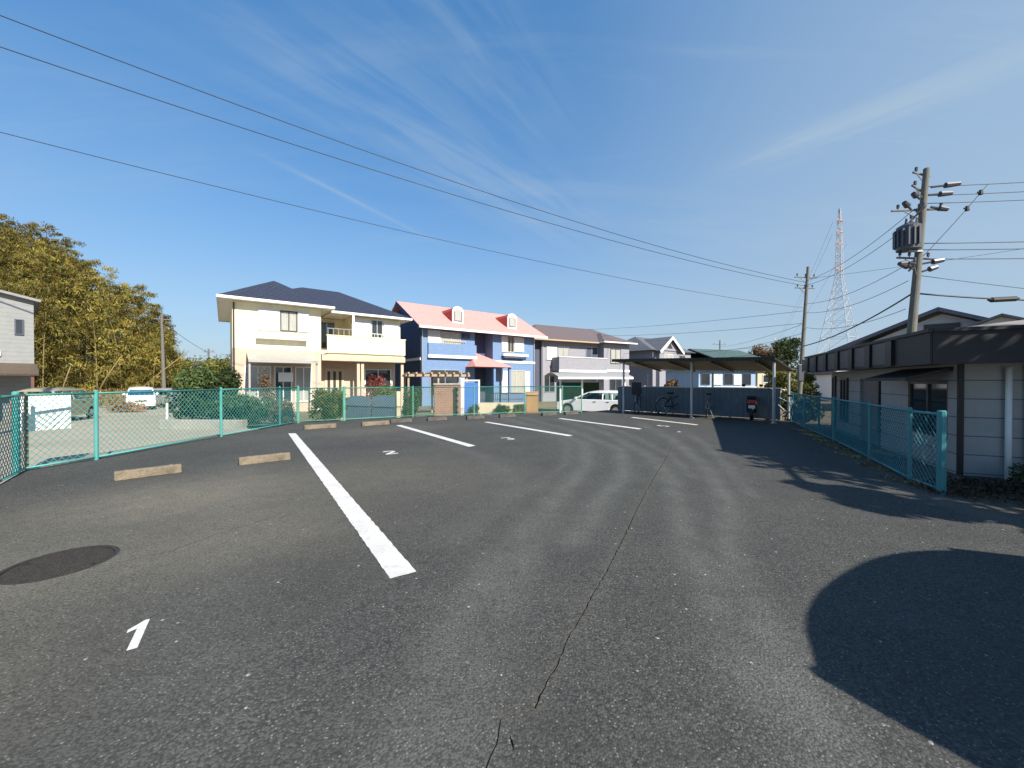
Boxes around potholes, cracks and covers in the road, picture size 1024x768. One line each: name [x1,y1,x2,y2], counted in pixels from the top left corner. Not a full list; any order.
crack [485,437,677,768]
manhole cover [0,545,120,585]
crack [129,516,275,560]
